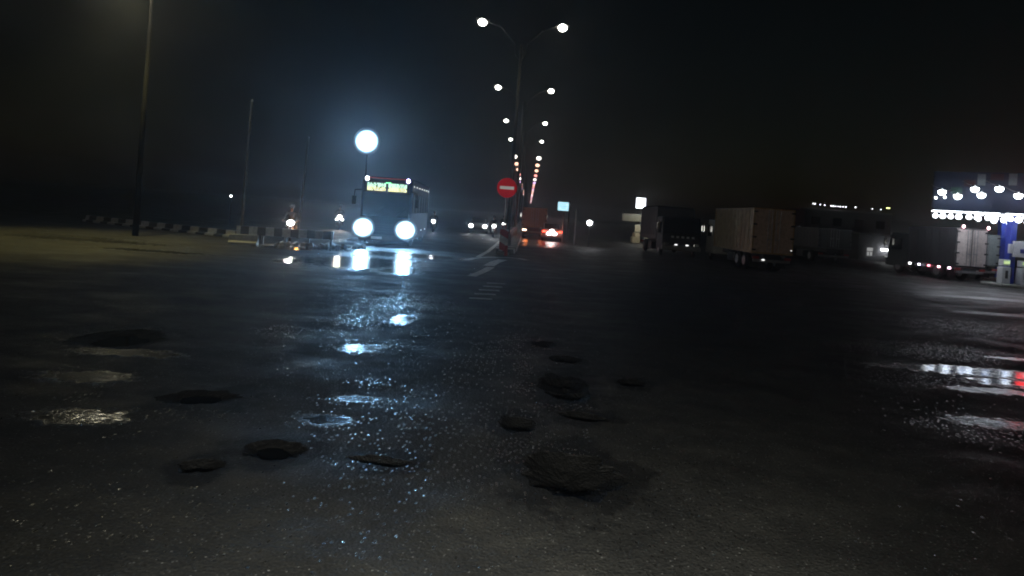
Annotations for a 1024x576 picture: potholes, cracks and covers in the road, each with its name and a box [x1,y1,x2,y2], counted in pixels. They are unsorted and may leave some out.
pothole [153,390,243,405]
pothole [62,329,169,349]
pothole [531,340,557,348]
pothole [617,379,645,387]
pothole [521,450,631,503]
pothole [549,355,583,364]
pothole [557,411,610,422]
pothole [177,458,227,473]
pothole [497,415,537,433]
pothole [242,439,309,462]
pothole [345,454,419,468]
pothole [537,373,592,405]
